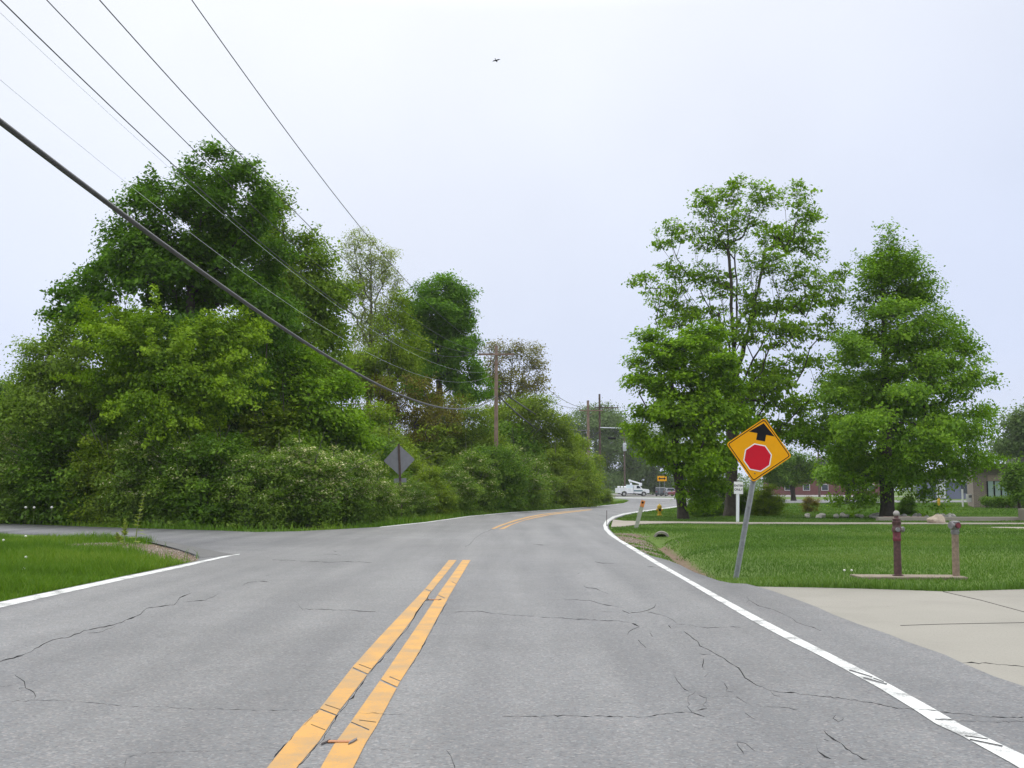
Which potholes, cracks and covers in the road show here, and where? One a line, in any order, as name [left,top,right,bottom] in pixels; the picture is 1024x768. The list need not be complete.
crack [0,561,1023,768]
